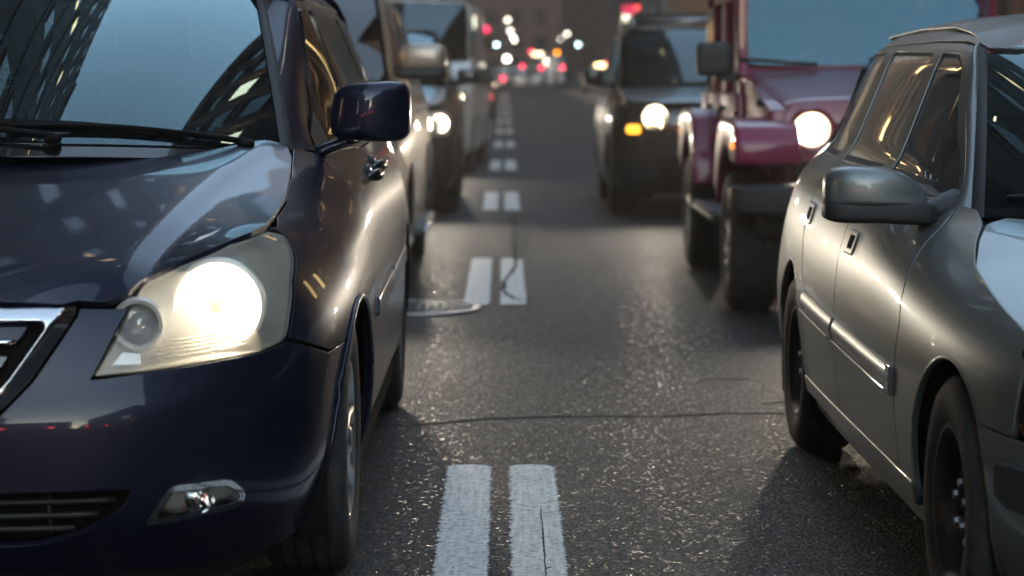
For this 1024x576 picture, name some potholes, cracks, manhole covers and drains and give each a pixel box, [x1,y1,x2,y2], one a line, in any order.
crack [374,402,786,427]
crack [499,210,531,303]
crack [540,508,551,576]
